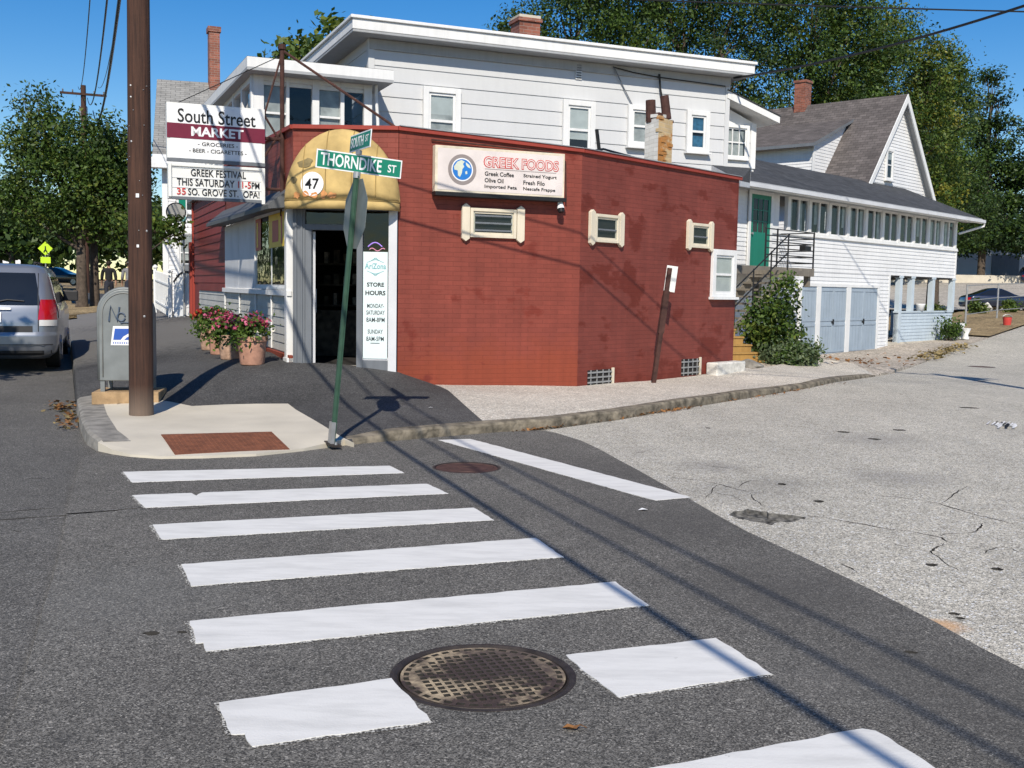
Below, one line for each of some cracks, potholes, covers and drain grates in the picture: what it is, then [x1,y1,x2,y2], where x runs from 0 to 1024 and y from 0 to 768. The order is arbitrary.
manhole cover [433,462,501,473]
pothole [729,509,806,525]
manhole cover [389,644,576,712]
crack [808,486,1019,570]
crack [669,465,769,508]
